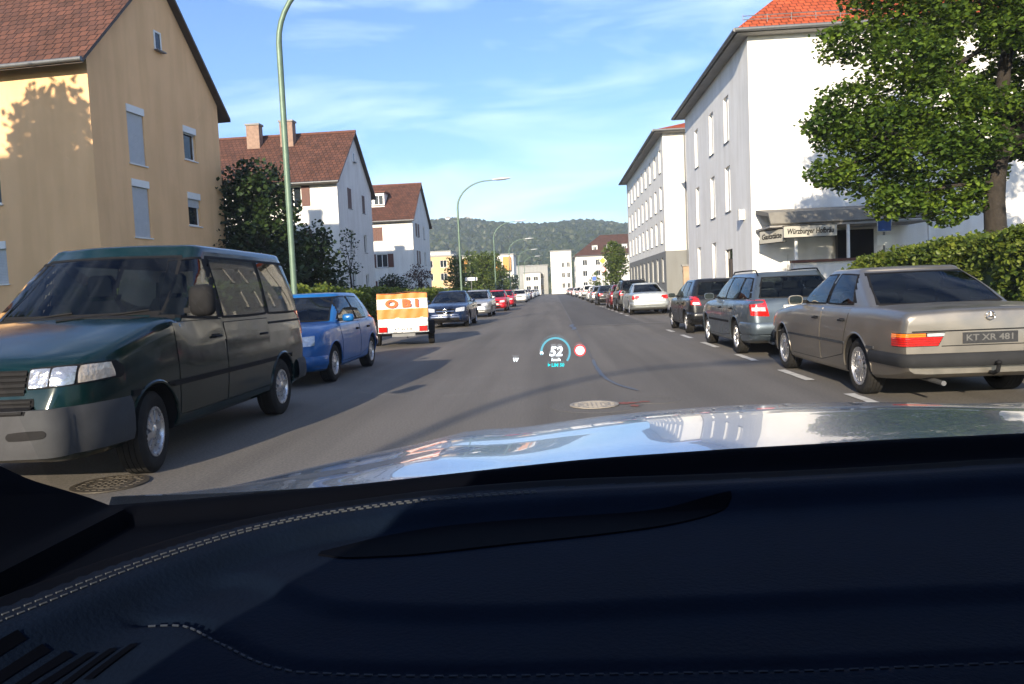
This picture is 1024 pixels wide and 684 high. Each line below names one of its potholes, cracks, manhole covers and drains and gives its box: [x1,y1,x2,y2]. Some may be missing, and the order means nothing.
manhole cover [69,475,150,494]
manhole cover [570,400,619,409]
